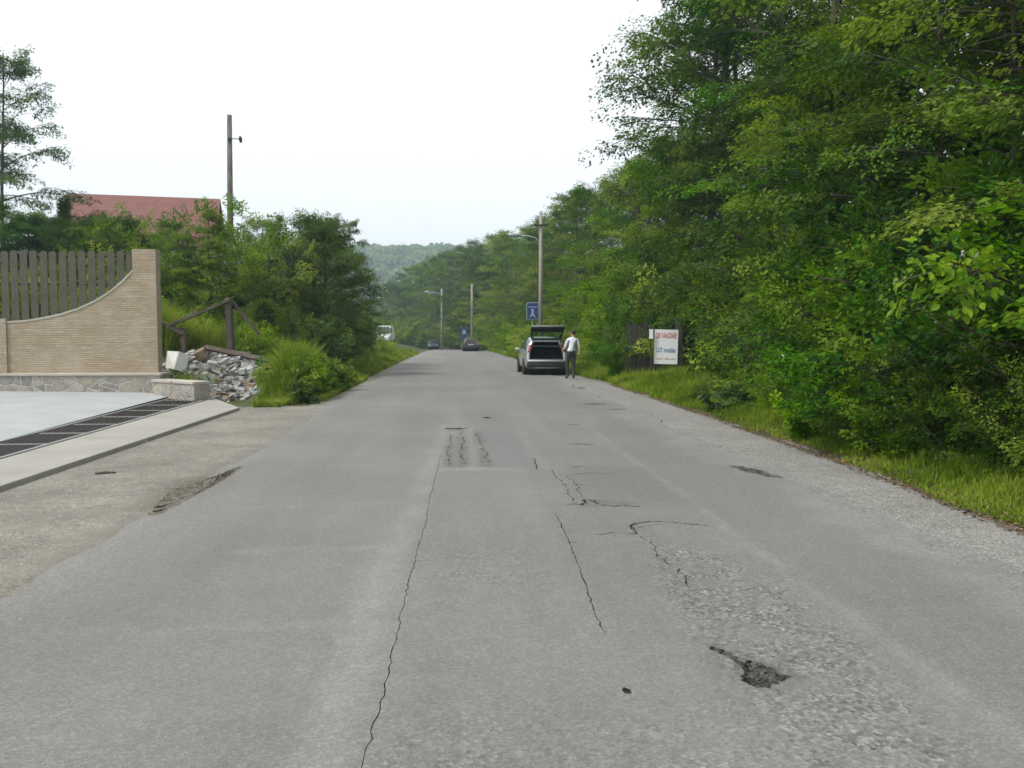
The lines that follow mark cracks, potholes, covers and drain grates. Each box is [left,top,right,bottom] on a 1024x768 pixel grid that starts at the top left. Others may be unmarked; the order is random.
crack [361,432,491,768]
crack [533,458,707,629]
pothole [148,466,243,516]
pothole [711,646,788,689]
